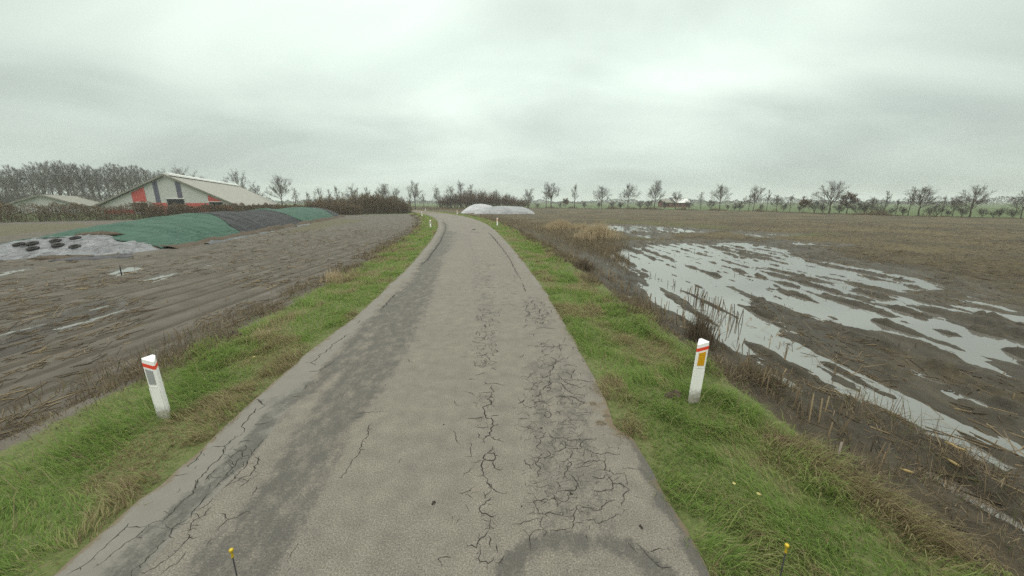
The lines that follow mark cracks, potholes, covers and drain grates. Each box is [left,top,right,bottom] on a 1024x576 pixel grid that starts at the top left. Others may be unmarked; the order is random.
crack [340,411,382,478]
crack [67,321,360,576]
crack [454,232,640,549]
